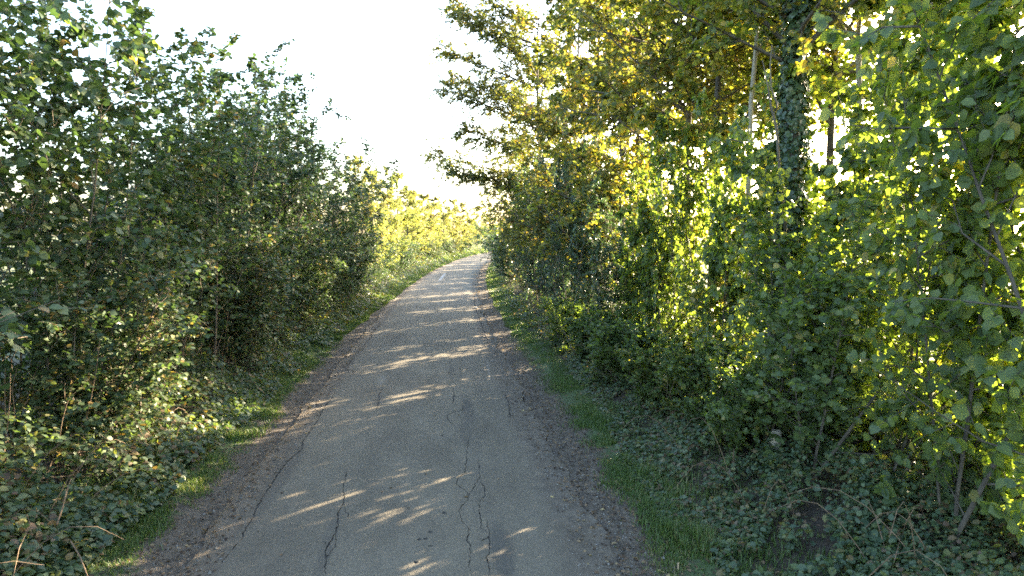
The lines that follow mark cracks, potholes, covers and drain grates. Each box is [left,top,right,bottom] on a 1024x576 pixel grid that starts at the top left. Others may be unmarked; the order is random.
crack [222,333,373,563]
crack [456,440,491,573]
